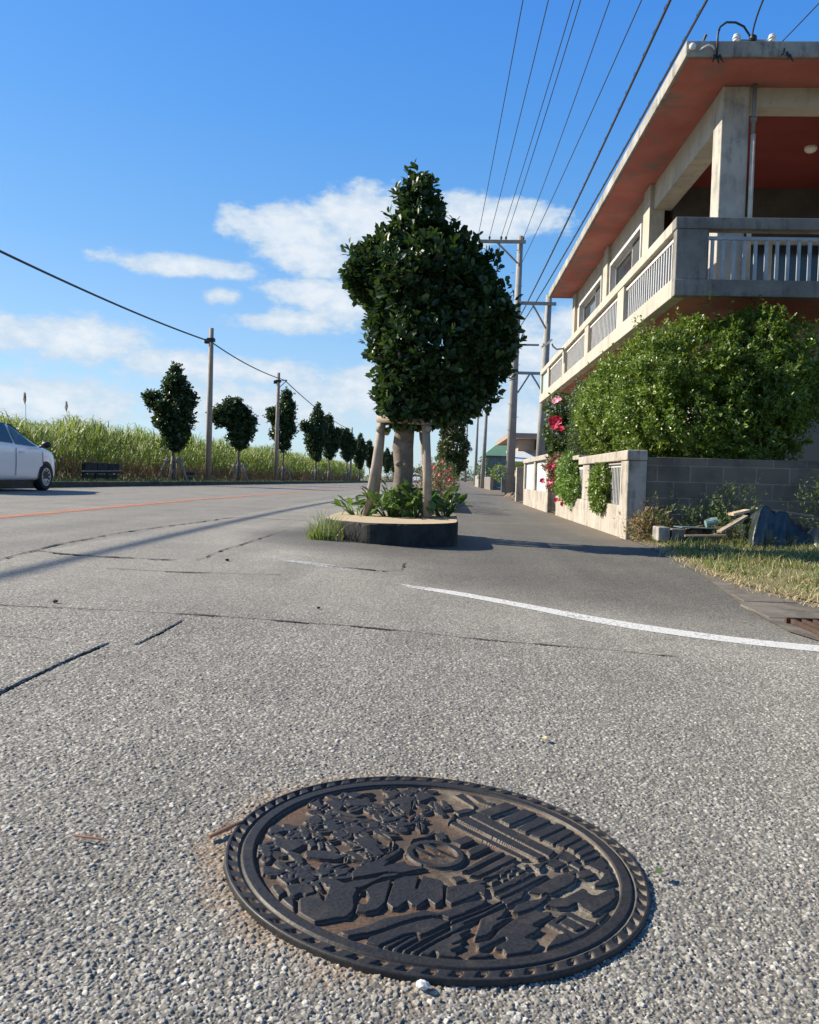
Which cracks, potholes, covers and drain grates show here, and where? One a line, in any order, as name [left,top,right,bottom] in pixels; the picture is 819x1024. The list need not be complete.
drain grate [784,617,819,637]
manhole cover [224,776,651,988]
